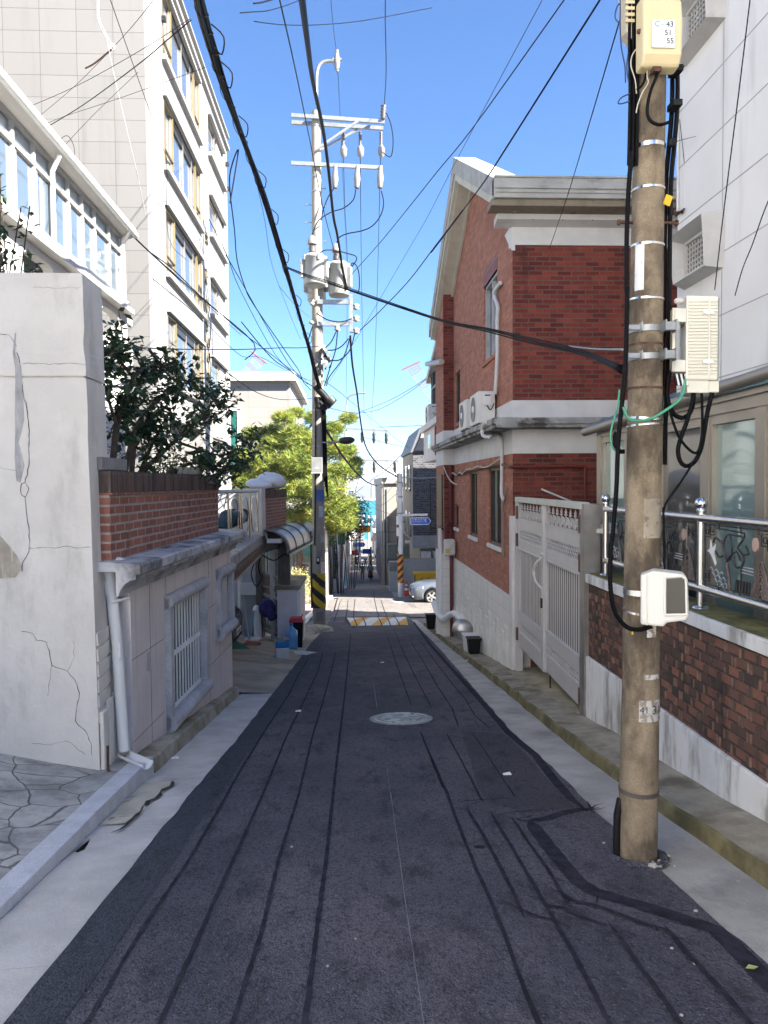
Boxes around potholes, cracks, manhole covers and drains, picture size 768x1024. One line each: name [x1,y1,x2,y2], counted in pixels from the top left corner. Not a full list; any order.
manhole cover [370,712,433,725]
